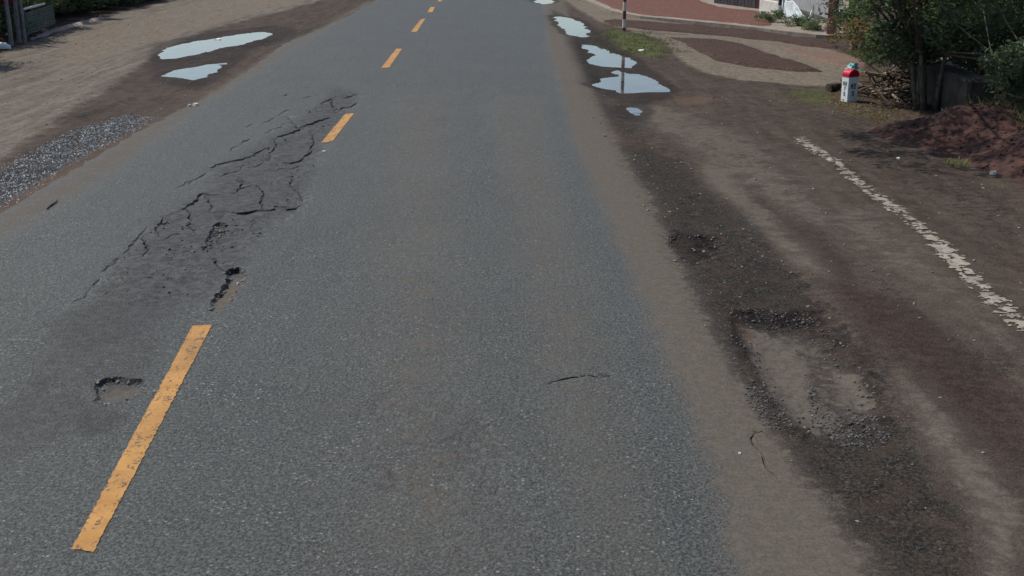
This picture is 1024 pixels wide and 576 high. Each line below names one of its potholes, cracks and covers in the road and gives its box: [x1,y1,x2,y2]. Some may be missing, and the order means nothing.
pothole [728,311,883,440]
pothole [666,233,726,265]
crack [750,431,777,479]
crack [71,87,362,304]
pothole [93,376,147,405]
pothole [208,267,247,313]
